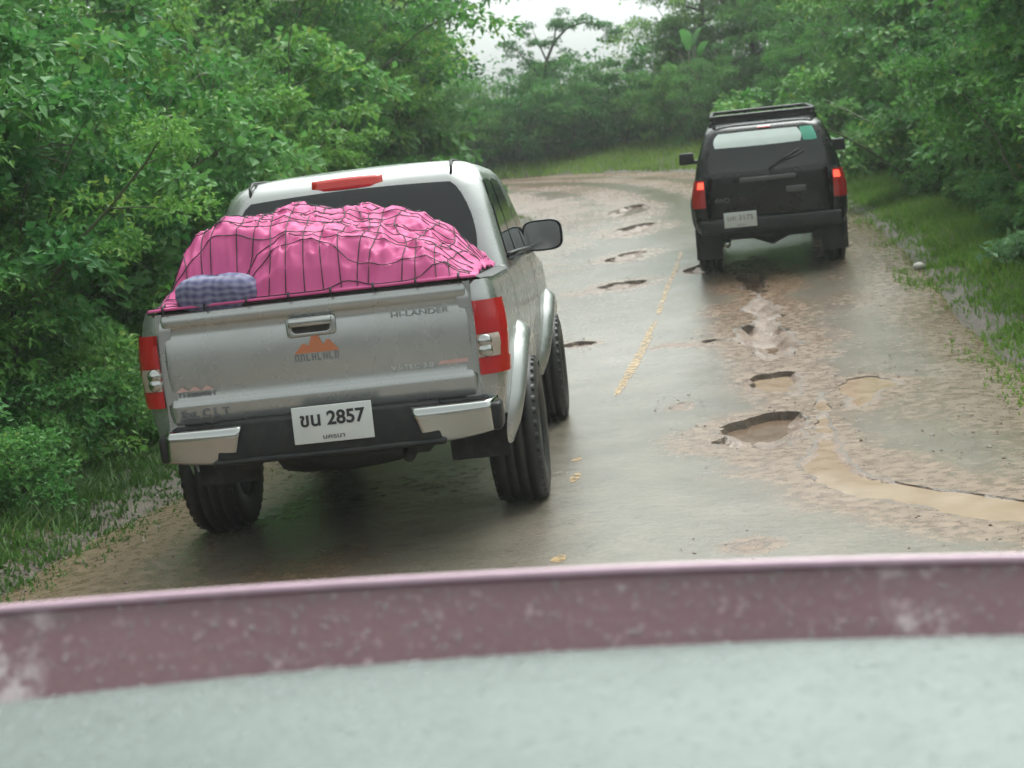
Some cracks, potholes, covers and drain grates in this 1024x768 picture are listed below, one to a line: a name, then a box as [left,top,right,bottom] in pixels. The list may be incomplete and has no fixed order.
pothole [604,251,647,263]
pothole [607,223,661,236]
pothole [749,371,805,397]
pothole [581,280,651,293]
pothole [606,204,654,217]
pothole [730,273,810,360]
pothole [711,411,812,449]
pothole [838,376,905,409]
